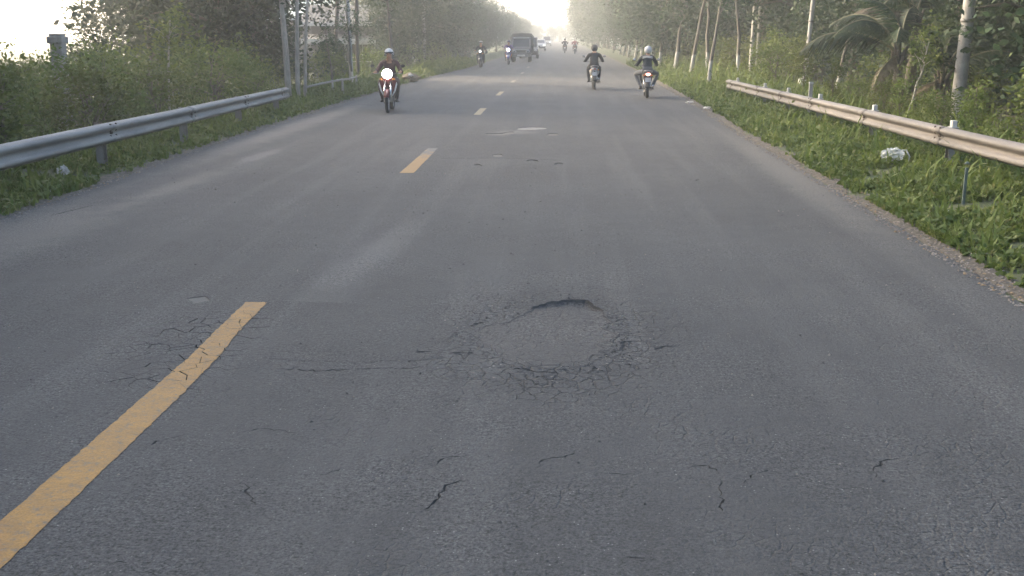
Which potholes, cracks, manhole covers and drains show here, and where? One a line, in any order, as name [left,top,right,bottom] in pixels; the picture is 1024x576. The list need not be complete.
crack [95,310,432,394]
crack [611,329,677,353]
crack [873,458,898,477]
crack [424,454,471,510]
pothole [475,299,616,365]
crack [689,465,725,511]
